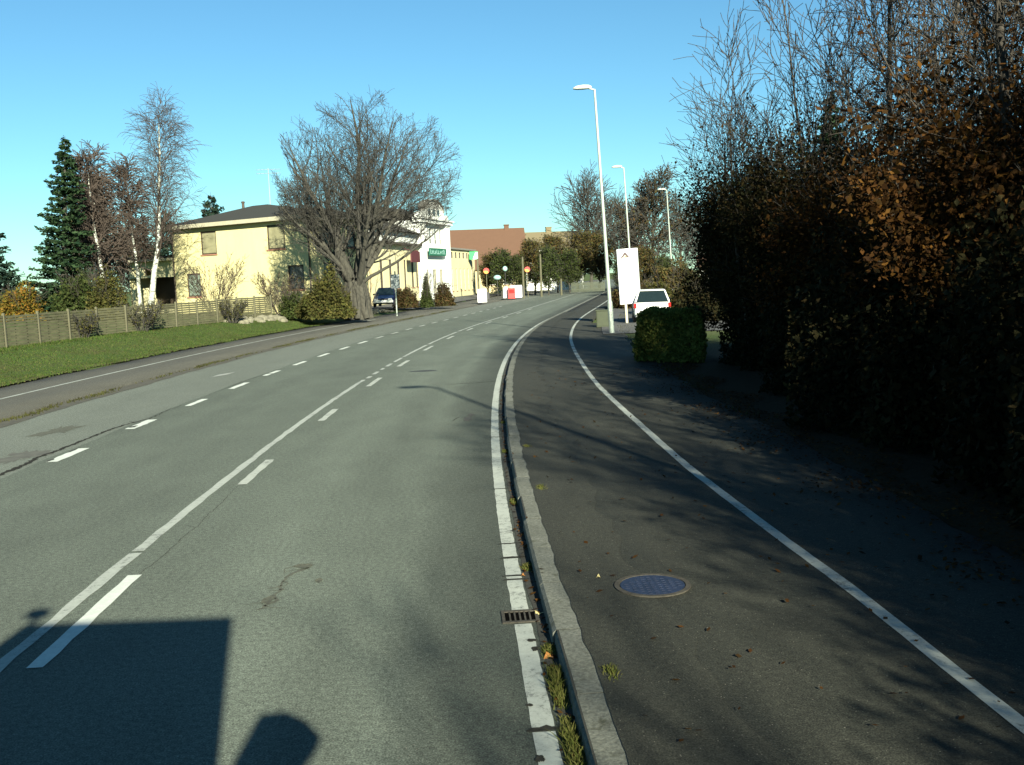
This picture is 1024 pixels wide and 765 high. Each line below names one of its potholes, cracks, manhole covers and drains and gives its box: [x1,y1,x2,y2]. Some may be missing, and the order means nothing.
manhole cover [614,573,691,598]
crack [141,485,239,573]
drain grate [501,609,540,624]
crack [247,562,313,610]
